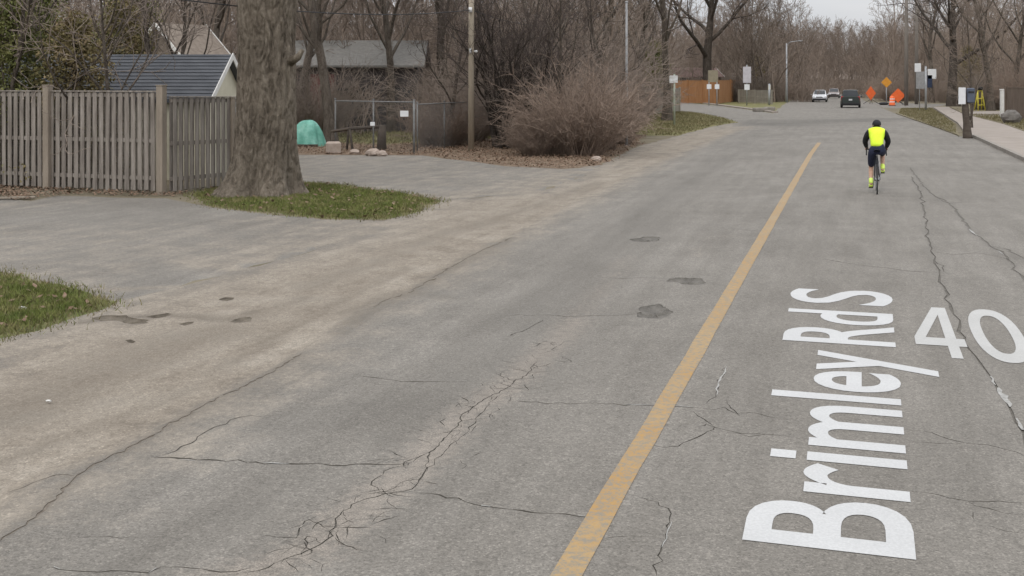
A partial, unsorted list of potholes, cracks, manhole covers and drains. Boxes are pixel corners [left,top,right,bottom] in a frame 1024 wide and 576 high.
crack [520,366,782,448]
crack [825,169,1024,456]
crack [0,341,585,575]
pothole [637,304,673,319]
pothole [92,315,148,324]
